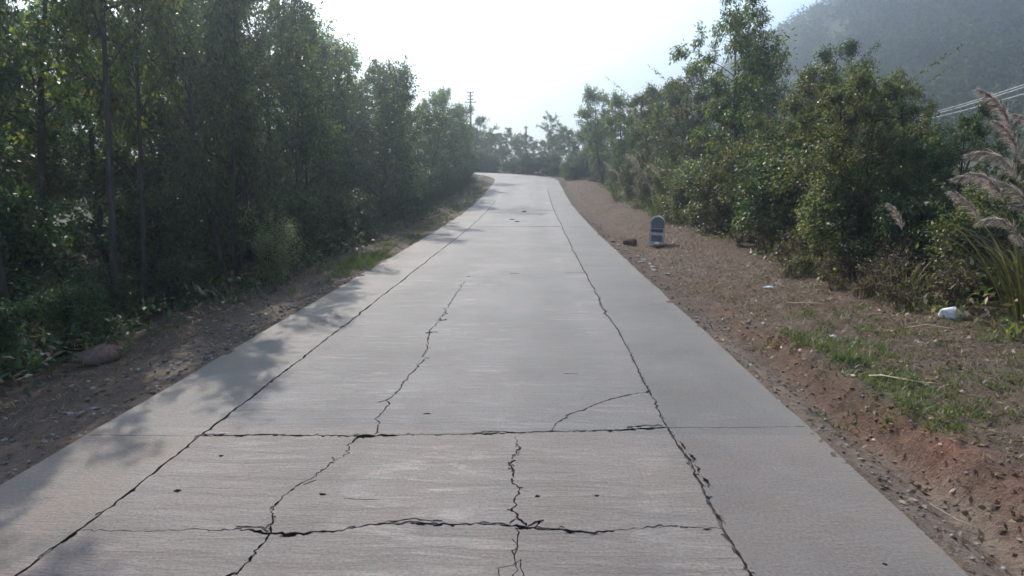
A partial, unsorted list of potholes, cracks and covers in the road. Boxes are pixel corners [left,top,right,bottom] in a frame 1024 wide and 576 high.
crack [77,276,805,576]
